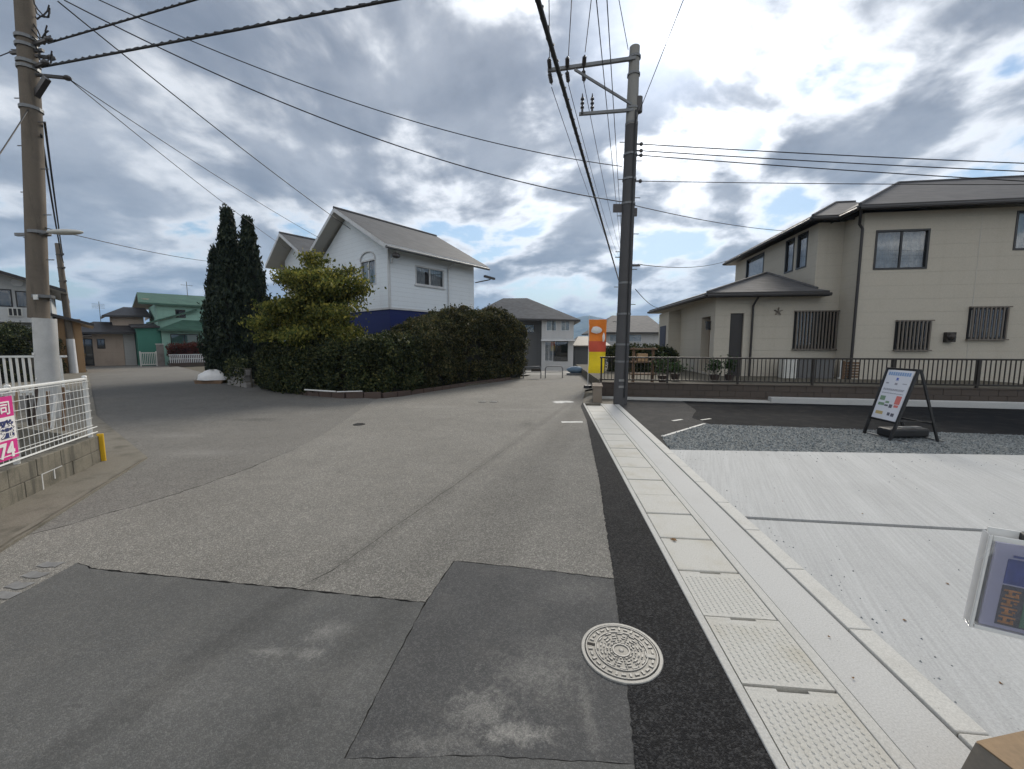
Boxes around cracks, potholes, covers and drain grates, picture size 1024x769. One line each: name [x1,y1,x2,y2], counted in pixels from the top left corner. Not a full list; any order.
manhole cover [581,623,664,685]
